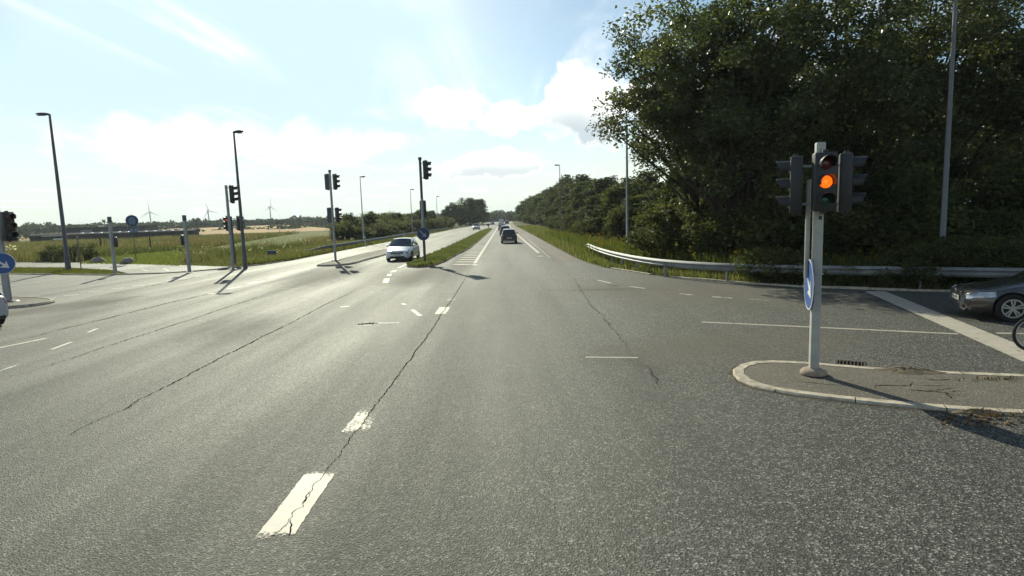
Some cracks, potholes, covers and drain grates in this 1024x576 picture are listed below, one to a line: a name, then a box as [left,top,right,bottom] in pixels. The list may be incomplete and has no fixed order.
crack [875,378,956,398]
